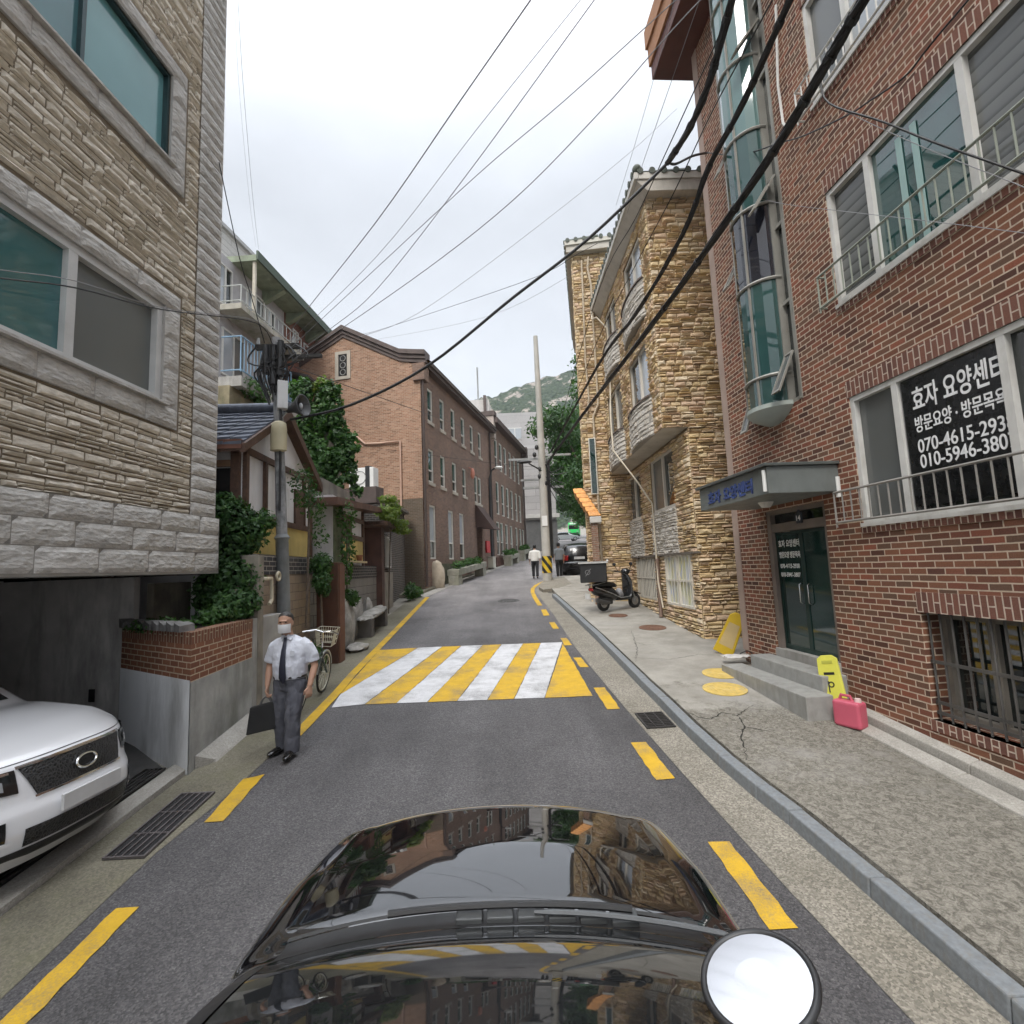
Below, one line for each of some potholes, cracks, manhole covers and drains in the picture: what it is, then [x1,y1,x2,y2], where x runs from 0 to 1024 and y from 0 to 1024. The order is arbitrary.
drain grate [635,711,676,729]
drain grate [102,791,215,861]
crack [687,705,775,758]
